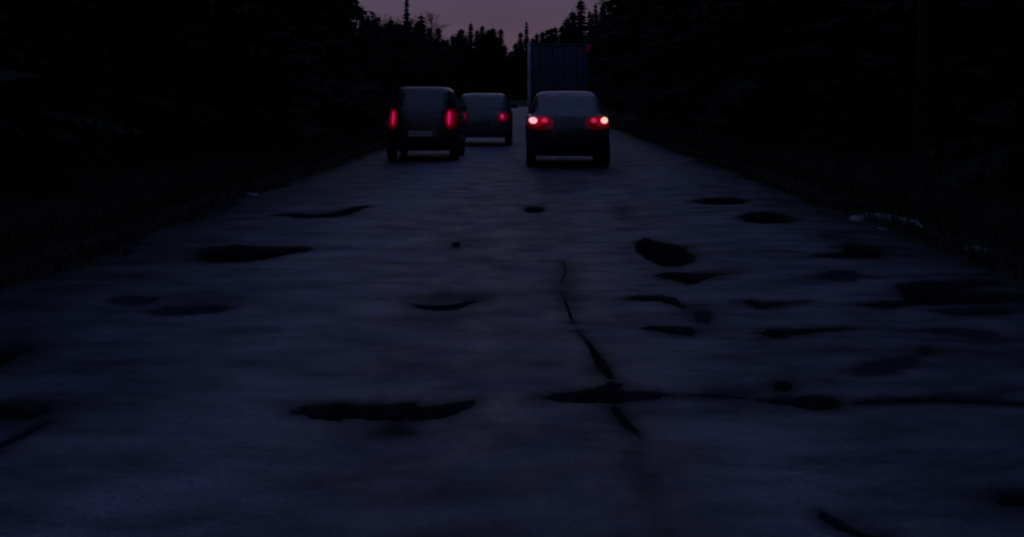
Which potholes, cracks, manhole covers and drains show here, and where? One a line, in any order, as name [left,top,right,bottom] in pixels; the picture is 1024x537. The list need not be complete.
pothole [654,272,727,285]
pothole [152,305,233,316]
pothole [639,326,697,337]
pothole [541,381,680,404]
pothole [290,401,476,423]
pothole [739,212,797,224]
pothole [633,238,696,267]
pothole [625,295,686,309]
pothole [755,395,843,411]
pothole [863,280,1021,309]
pothole [407,300,478,311]
pothole [274,205,369,218]
